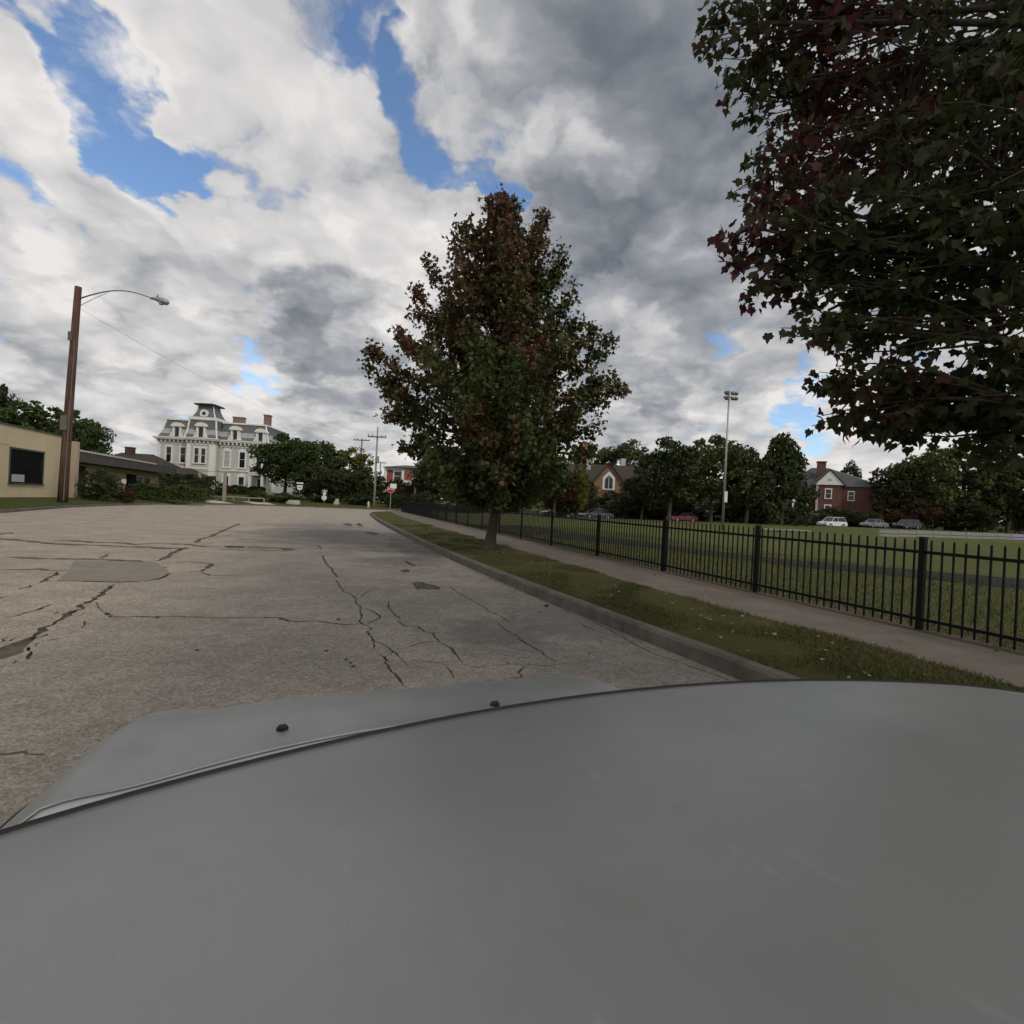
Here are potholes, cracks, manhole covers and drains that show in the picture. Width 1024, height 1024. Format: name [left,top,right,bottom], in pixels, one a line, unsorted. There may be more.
pothole [412,582,441,590]
crack [0,523,569,687]
